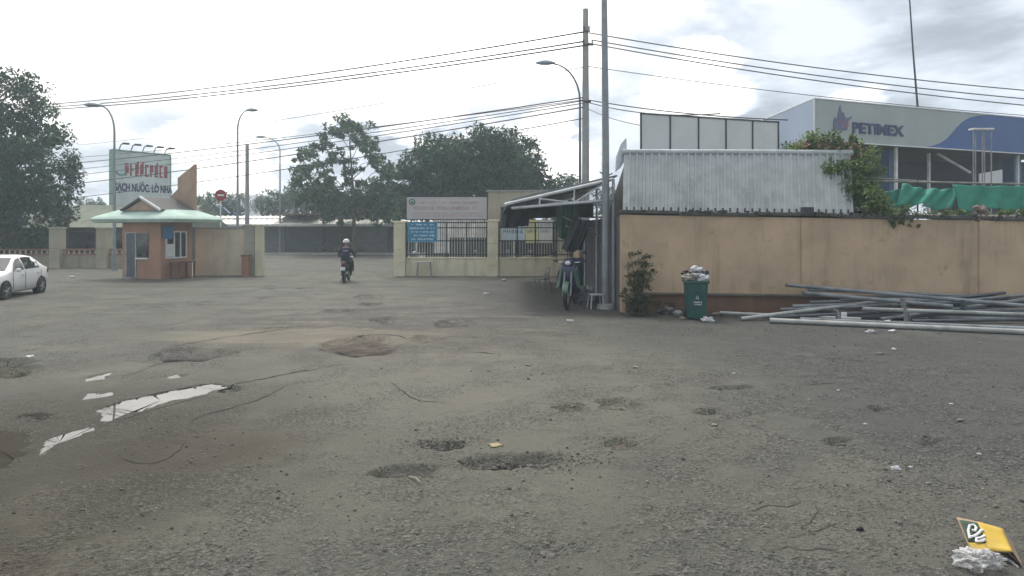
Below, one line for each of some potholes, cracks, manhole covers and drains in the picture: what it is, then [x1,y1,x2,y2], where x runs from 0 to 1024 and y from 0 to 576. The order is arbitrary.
pothole [606,402,641,411]
pothole [162,351,228,361]
pothole [0,361,32,379]
crack [753,502,841,554]
crack [120,325,317,378]
pothole [474,460,552,470]
crack [105,364,345,464]
